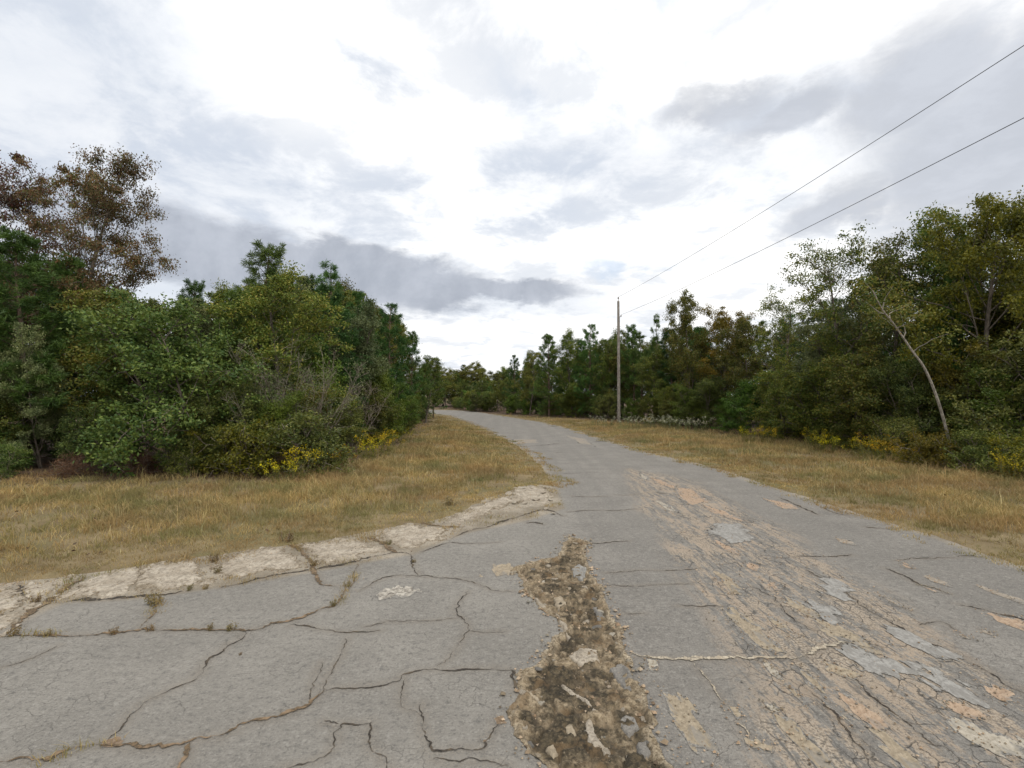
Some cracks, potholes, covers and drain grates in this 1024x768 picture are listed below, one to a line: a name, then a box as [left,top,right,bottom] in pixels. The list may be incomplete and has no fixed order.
pothole [506,536,674,768]
crack [809,554,1024,693]
crack [802,678,940,760]
crack [0,494,635,768]
